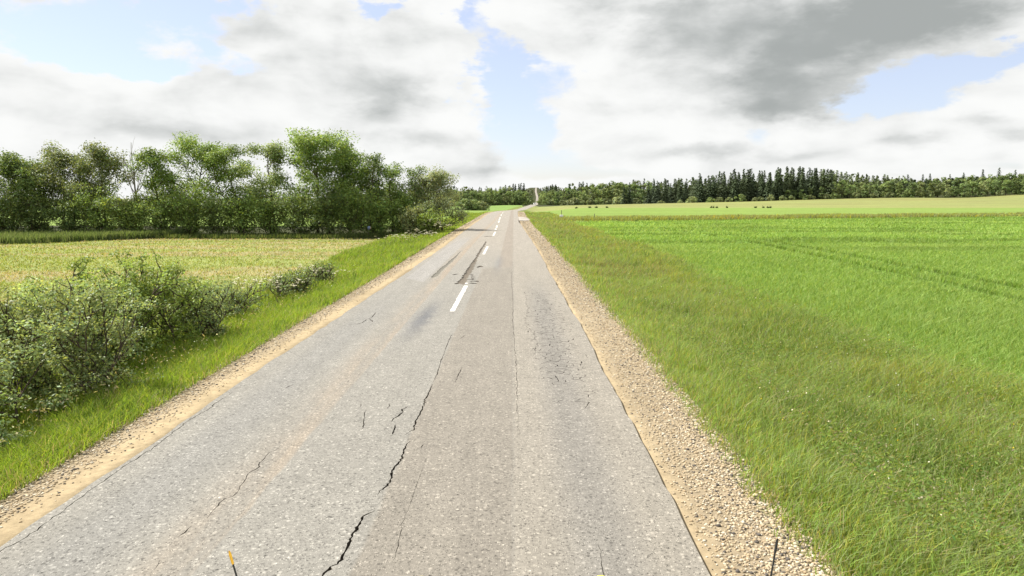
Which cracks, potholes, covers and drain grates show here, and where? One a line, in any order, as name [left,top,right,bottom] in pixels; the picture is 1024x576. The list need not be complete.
crack [157,449,277,566]
crack [322,335,465,576]
crack [524,290,595,408]
